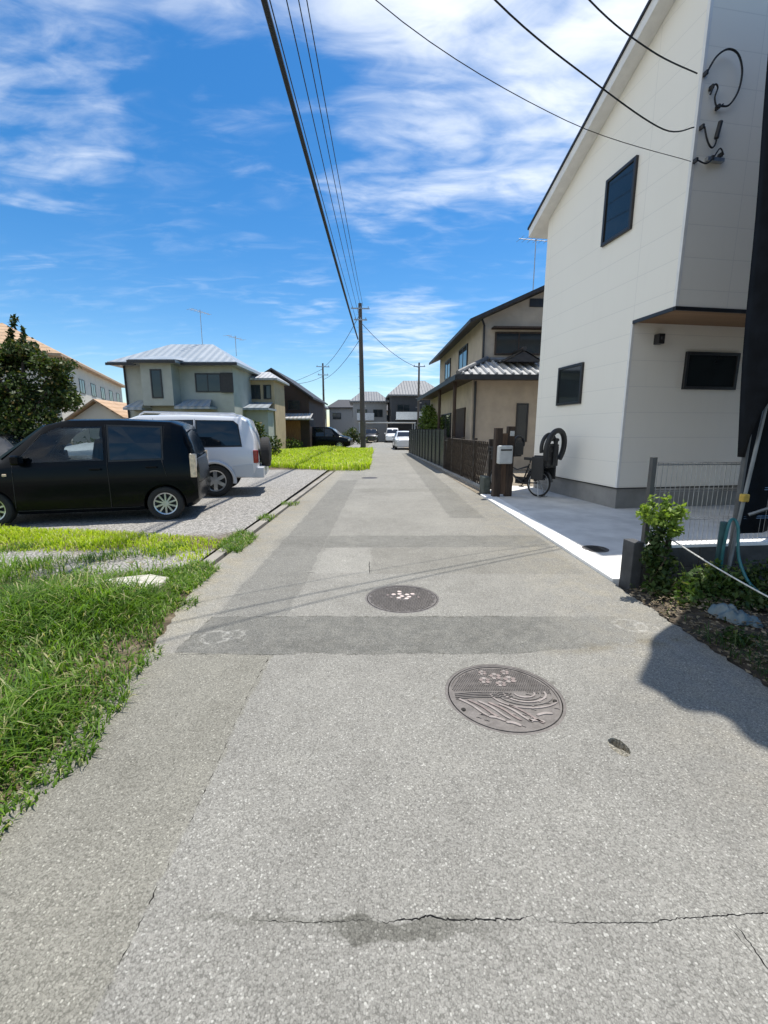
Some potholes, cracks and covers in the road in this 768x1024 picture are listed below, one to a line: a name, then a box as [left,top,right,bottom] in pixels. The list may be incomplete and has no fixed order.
manhole cover [365,585,439,613]
crack [257,912,768,969]
manhole cover [445,664,566,735]
